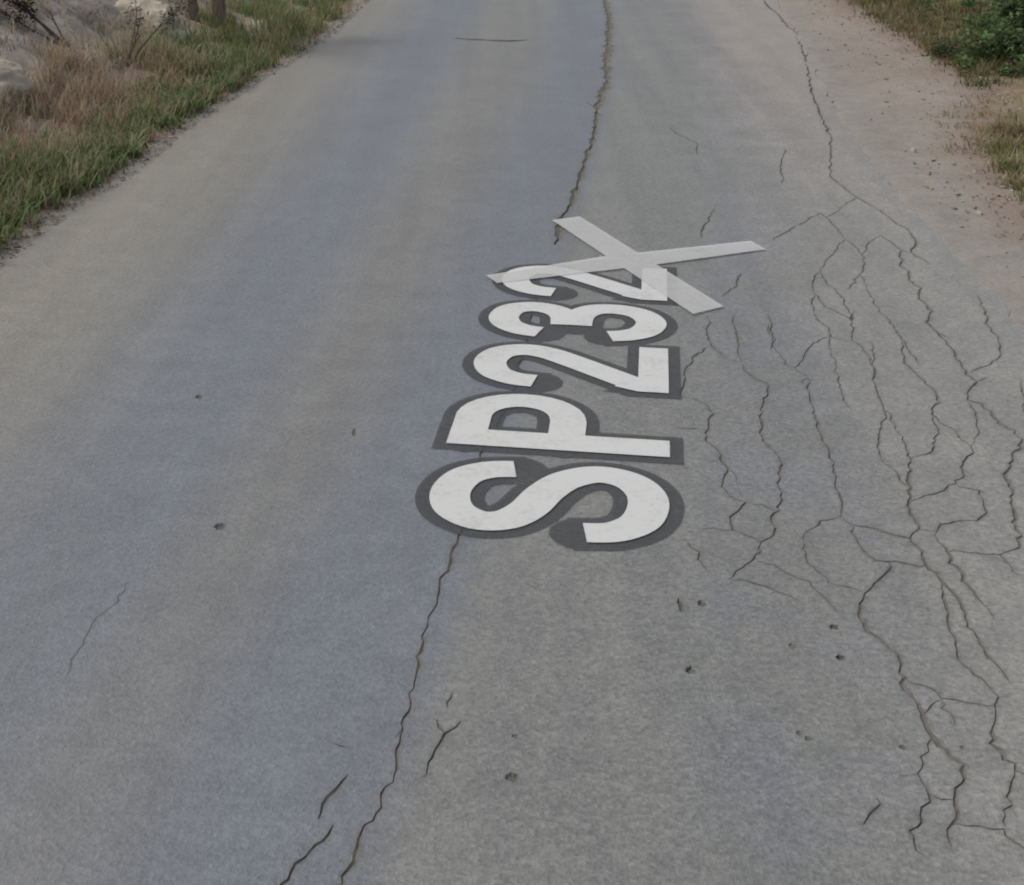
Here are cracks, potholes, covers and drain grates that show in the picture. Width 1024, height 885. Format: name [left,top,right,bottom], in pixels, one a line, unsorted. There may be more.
crack [763,0,831,136]
crack [676,137,1024,859]
crack [279,774,349,885]
crack [65,581,130,677]
crack [419,693,461,779]
